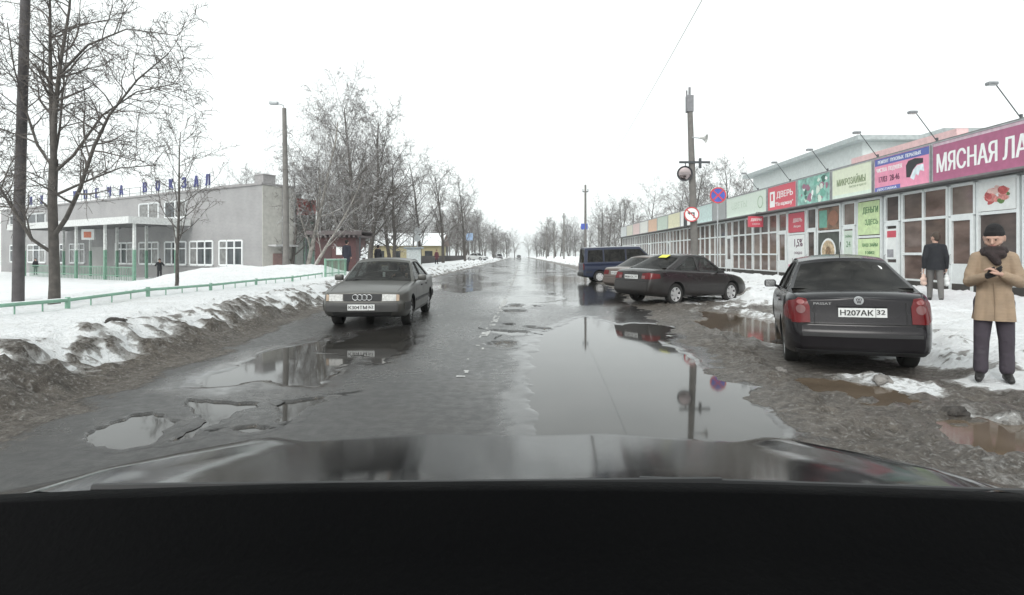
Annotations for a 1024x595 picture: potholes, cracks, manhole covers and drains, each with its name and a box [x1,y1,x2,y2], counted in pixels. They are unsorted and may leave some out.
pothole [68,409,206,454]
pothole [152,396,285,448]
pothole [515,324,555,332]
pothole [479,328,538,337]
pothole [476,339,529,350]
pothole [256,393,339,425]
